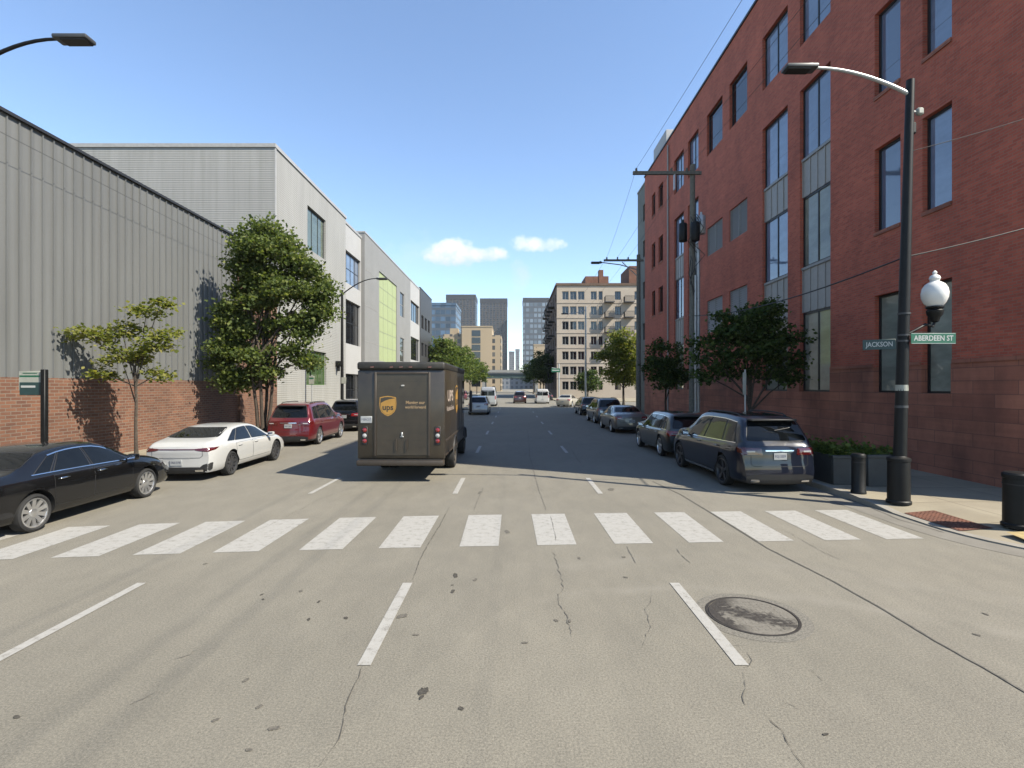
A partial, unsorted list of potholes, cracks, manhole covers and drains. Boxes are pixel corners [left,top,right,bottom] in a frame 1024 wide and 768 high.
crack [550,516,572,634]
crack [318,669,361,767]
manhole cover [696,593,815,642]
